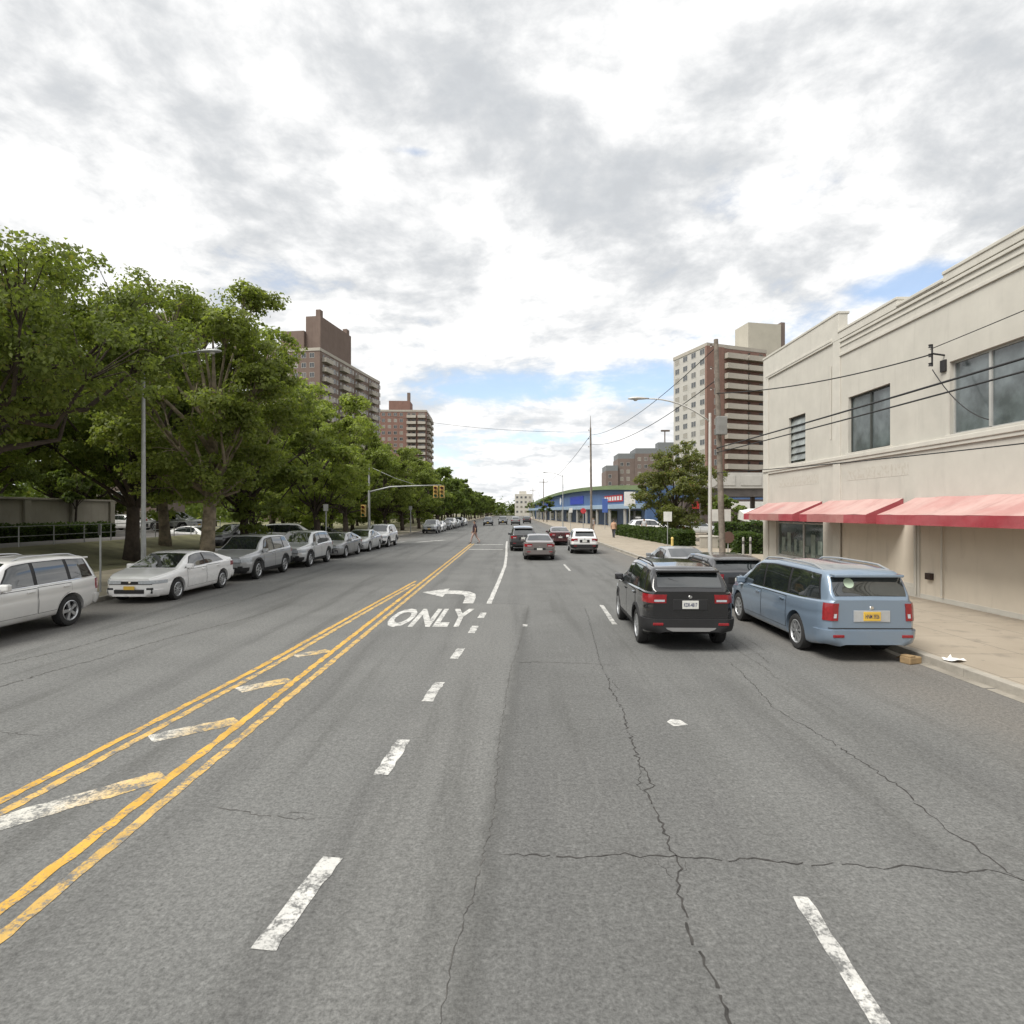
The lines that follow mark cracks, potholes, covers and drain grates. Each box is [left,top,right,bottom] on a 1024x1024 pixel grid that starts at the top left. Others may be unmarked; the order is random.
crack [503,609,1023,1024]
crack [202,805,319,820]
